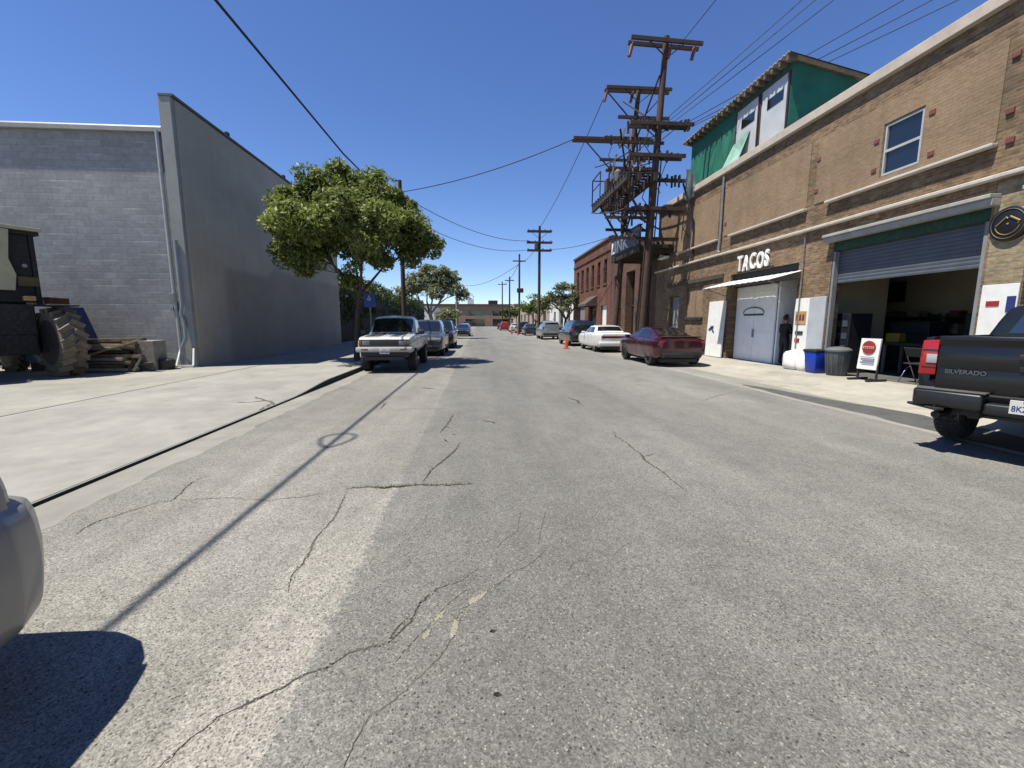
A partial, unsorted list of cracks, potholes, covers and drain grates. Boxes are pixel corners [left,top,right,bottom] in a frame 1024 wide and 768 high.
crack [612,430,690,494]
crack [76,408,626,768]
